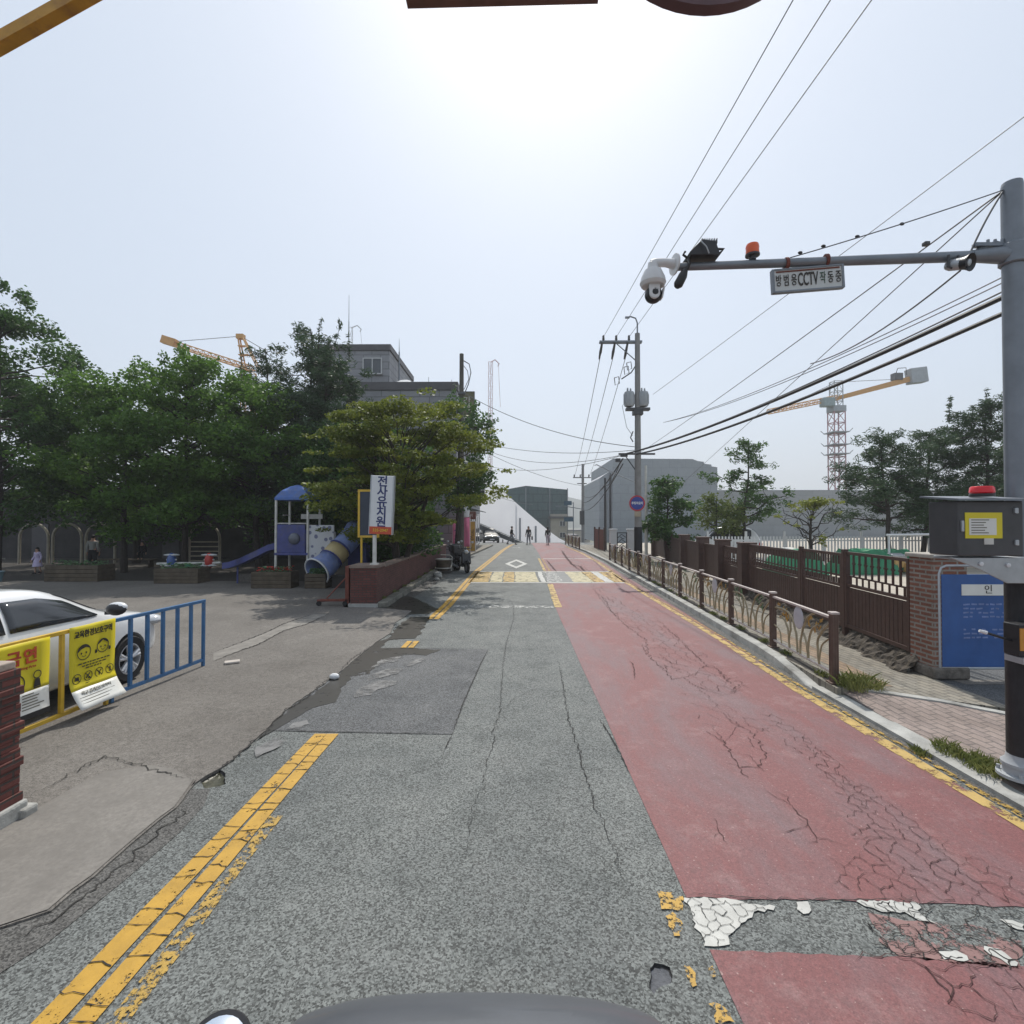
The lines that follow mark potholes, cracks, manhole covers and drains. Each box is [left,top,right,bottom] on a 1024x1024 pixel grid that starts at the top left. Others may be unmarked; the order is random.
crack [548,544,1024,1020]
crack [30,647,369,797]
pothole [201,769,226,788]
crack [445,606,593,968]
pothole [649,963,673,994]
